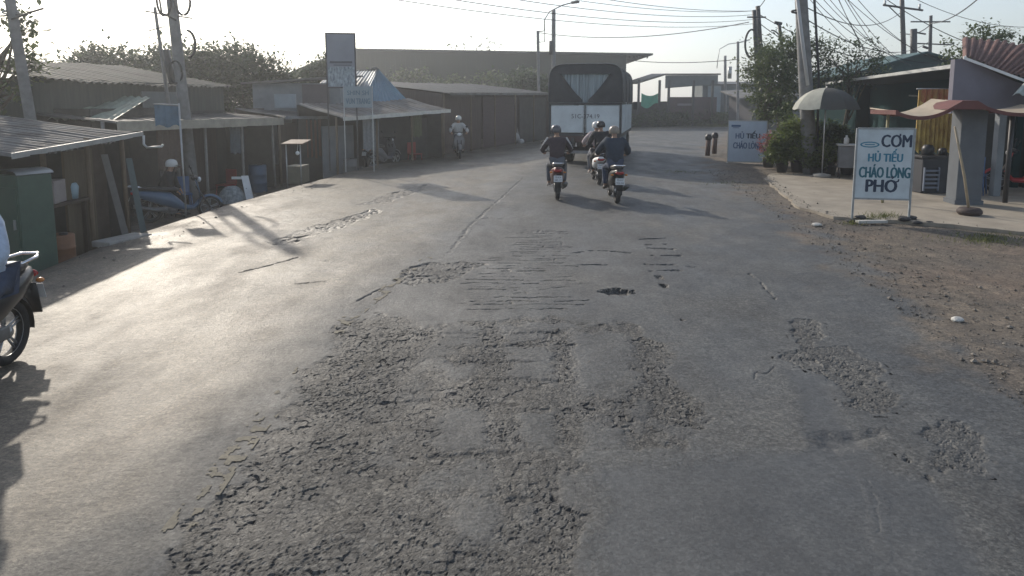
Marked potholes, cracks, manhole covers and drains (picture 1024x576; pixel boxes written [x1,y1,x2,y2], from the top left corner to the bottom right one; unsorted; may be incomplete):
crack [130,184,1011,576]
pothole [592,286,643,297]
